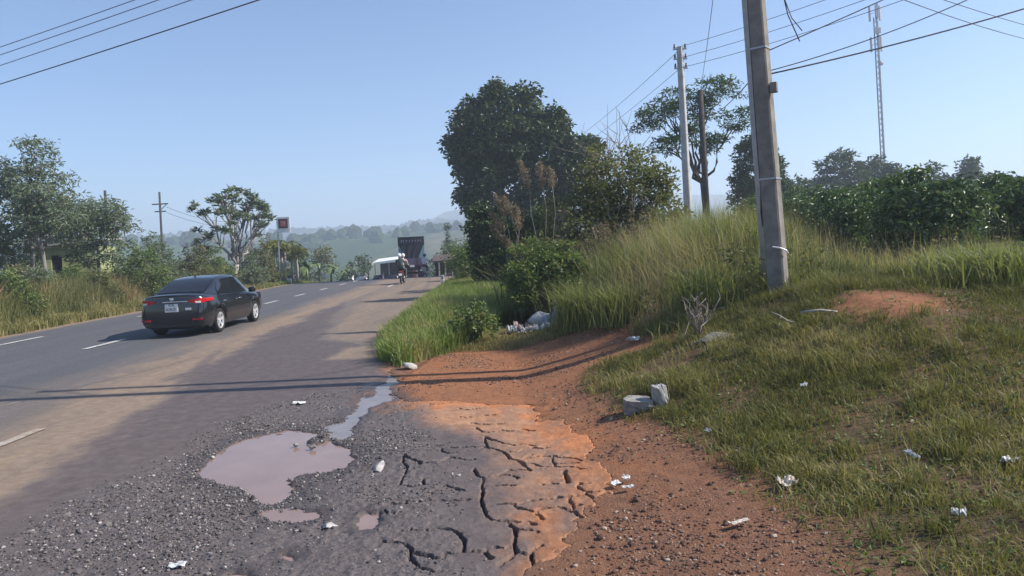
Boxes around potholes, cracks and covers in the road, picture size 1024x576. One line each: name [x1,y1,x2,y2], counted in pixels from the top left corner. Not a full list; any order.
pothole [183,427,364,508]
pothole [248,505,336,527]
crack [380,401,602,573]
